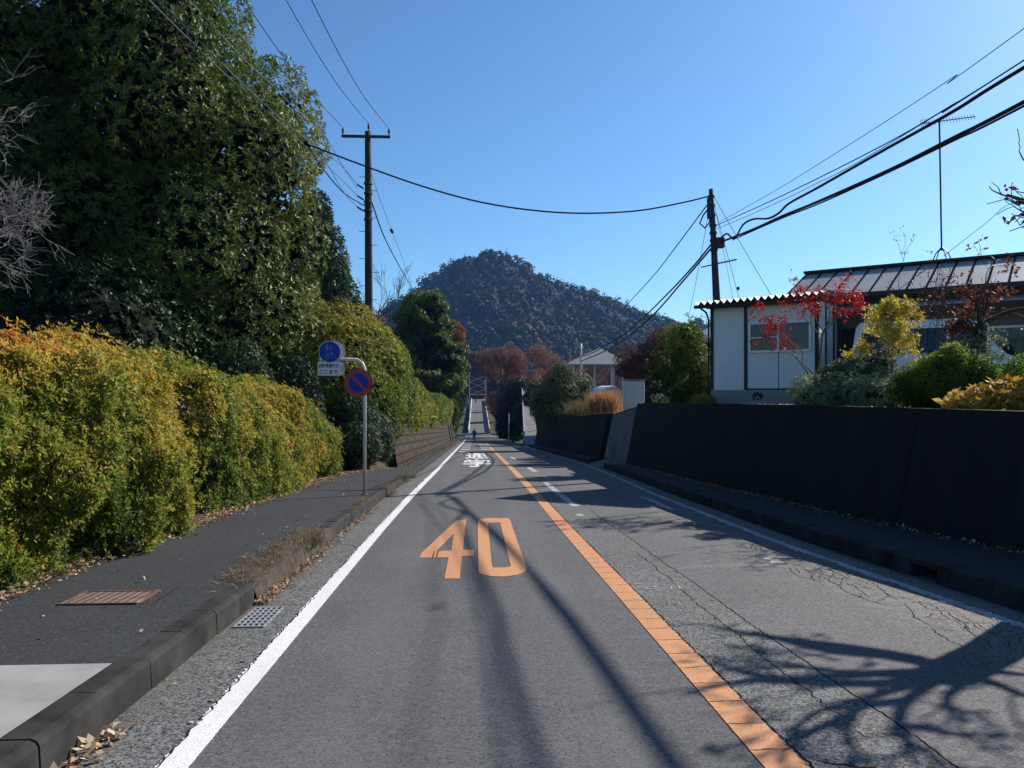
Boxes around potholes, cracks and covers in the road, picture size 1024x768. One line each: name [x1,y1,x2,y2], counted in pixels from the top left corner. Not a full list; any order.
drain grate [232,607,284,628]
drain grate [56,589,161,606]
crack [790,567,1022,648]
